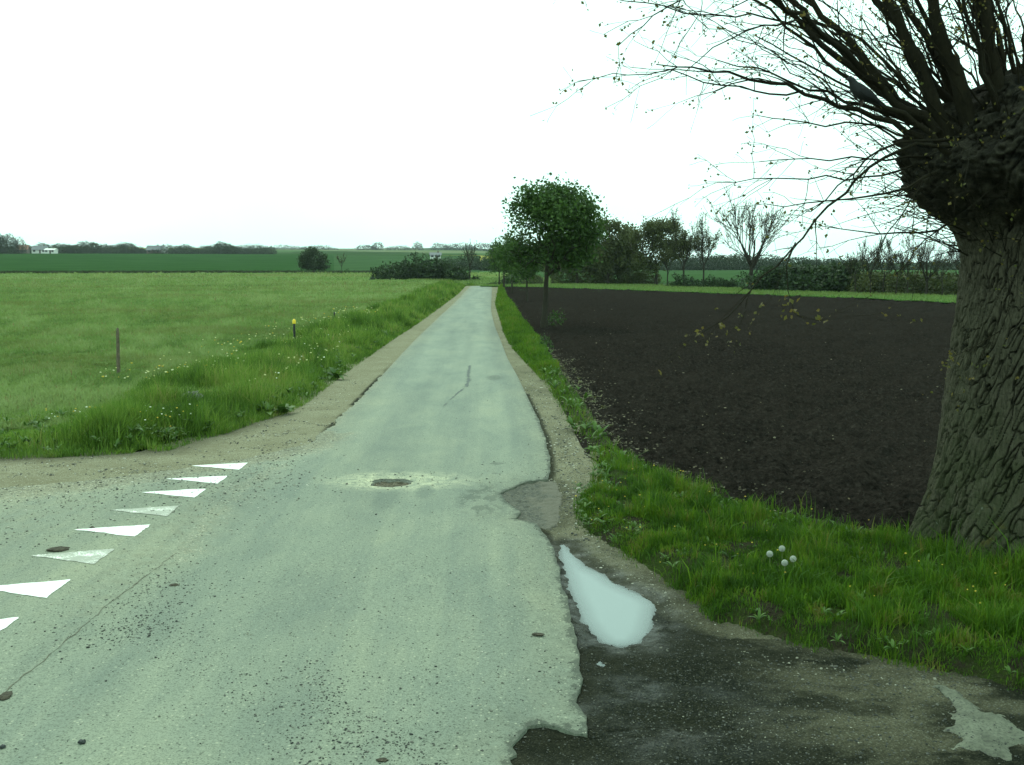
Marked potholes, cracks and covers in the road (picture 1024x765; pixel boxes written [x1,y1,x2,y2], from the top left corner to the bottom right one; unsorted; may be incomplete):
crack [445,365,471,405]
